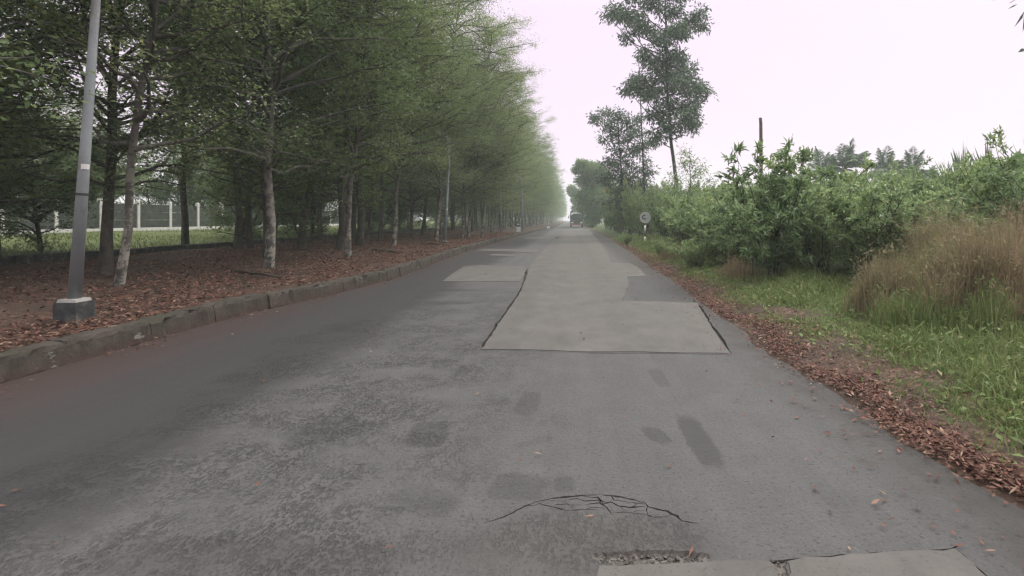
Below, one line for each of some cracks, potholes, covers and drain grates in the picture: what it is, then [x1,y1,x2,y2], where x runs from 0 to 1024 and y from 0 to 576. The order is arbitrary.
pothole [590,549,711,566]
crack [483,495,693,524]
